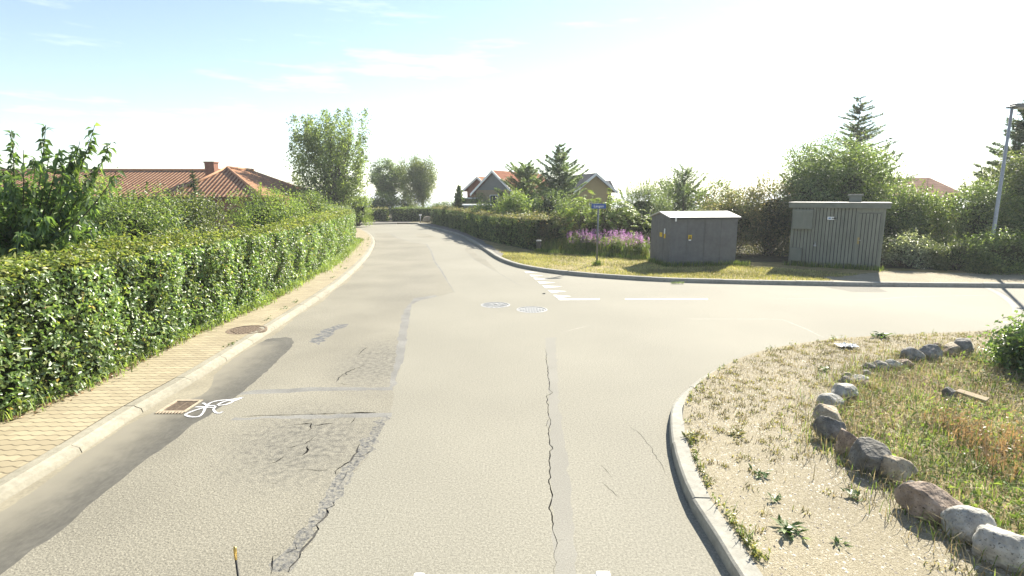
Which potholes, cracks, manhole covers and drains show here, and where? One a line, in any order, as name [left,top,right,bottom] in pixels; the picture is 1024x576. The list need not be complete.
crack [546,353,558,570]
manhole cover [225,325,268,335]
crack [271,444,360,573]
drain grate [154,400,203,414]
